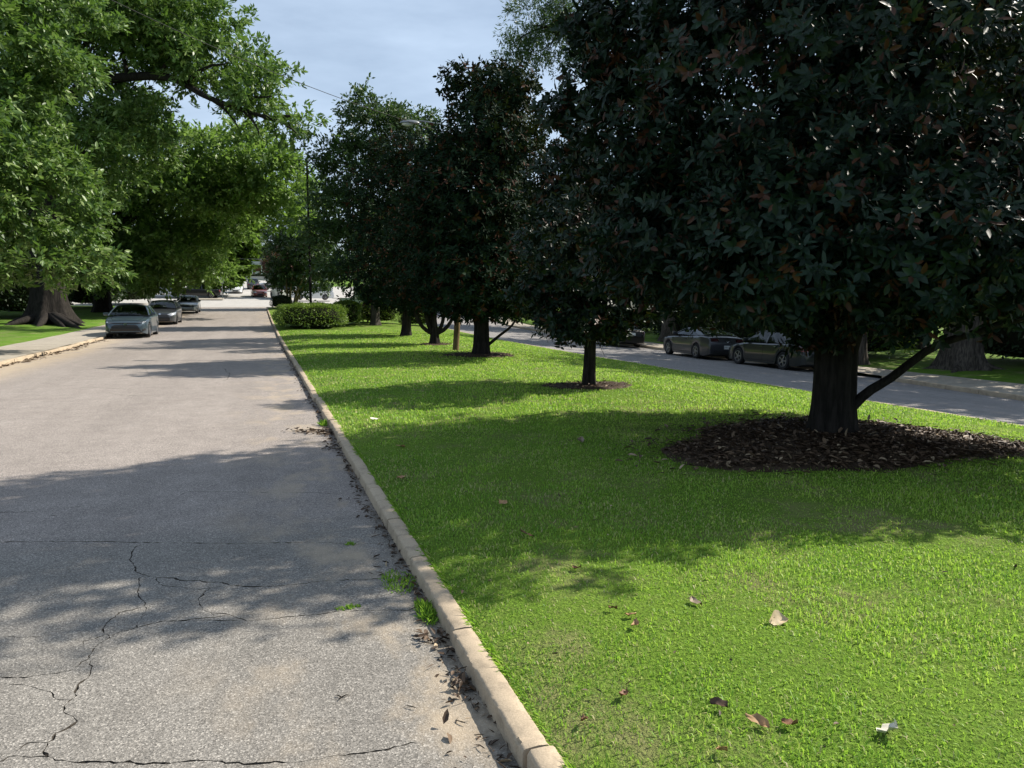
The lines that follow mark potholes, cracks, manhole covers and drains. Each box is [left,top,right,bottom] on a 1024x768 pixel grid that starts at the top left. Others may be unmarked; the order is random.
crack [0,541,413,765]
